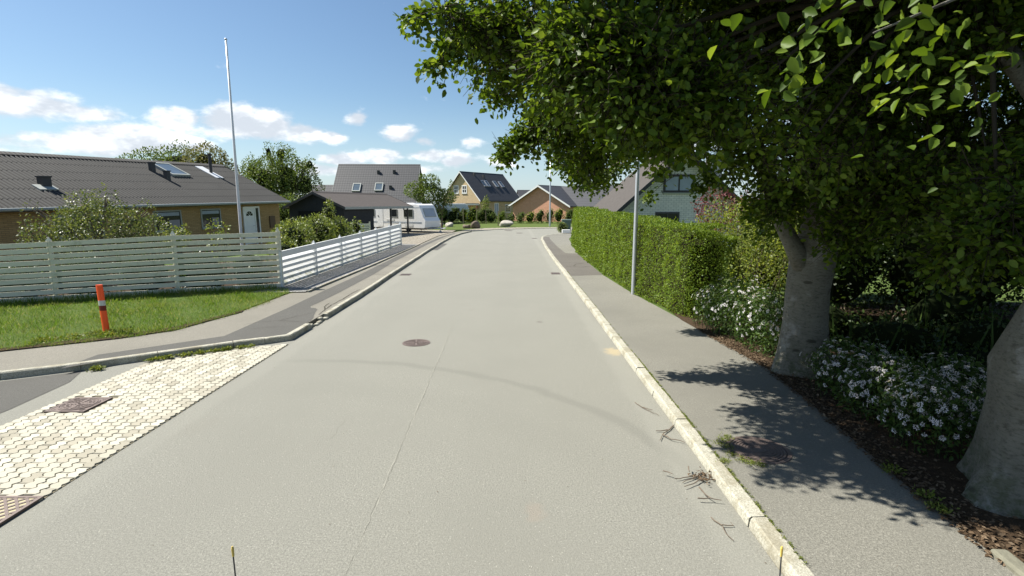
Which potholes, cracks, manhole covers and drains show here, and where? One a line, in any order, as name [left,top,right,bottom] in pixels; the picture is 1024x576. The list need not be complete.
manhole cover [44,397,113,413]
manhole cover [402,339,430,347]
manhole cover [725,436,792,464]
